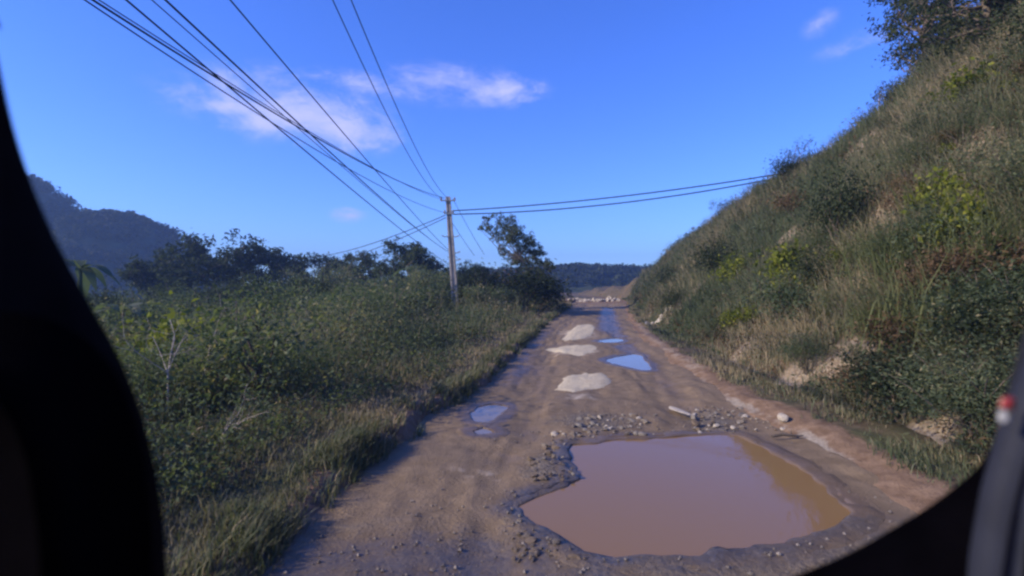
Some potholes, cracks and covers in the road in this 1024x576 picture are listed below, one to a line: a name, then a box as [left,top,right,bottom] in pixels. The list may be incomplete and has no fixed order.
pothole [499,431,886,573]
pothole [454,401,519,427]
pothole [593,353,662,374]
pothole [586,337,636,345]
pothole [456,422,510,439]
